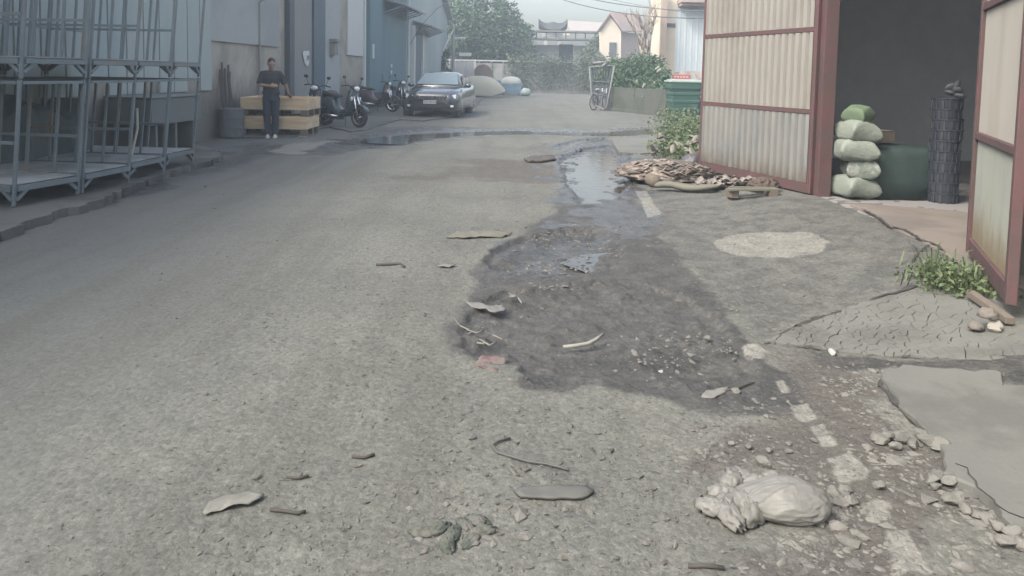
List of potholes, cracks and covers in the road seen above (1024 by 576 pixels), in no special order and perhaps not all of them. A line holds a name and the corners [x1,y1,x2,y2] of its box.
pothole [542,143,650,209]
crack [764,284,979,359]
pothole [462,224,645,287]
crack [955,463,1024,518]
crack [863,209,945,261]
